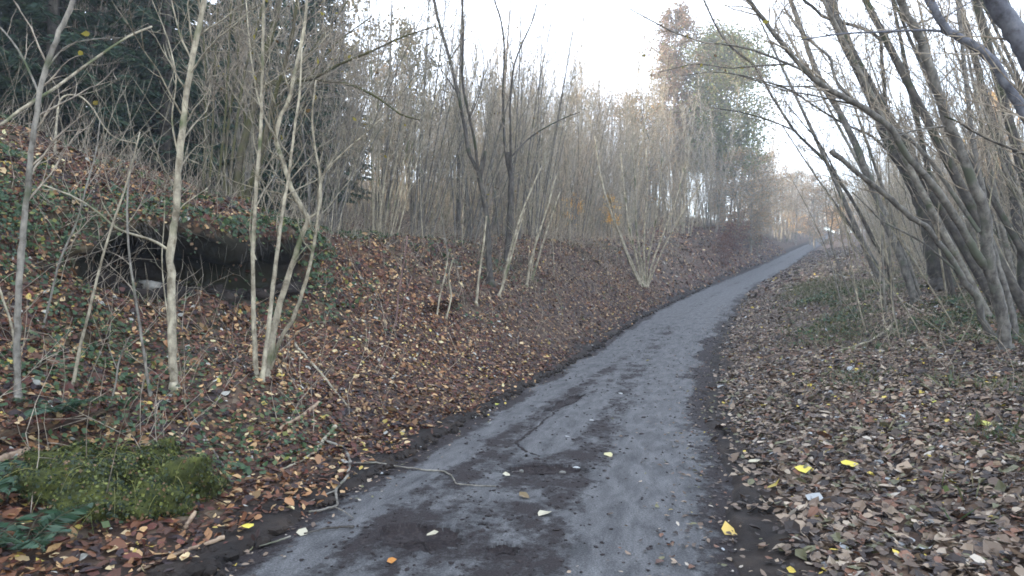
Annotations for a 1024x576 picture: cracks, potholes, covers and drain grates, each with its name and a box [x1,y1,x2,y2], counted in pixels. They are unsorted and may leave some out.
crack [511,409,562,457]
